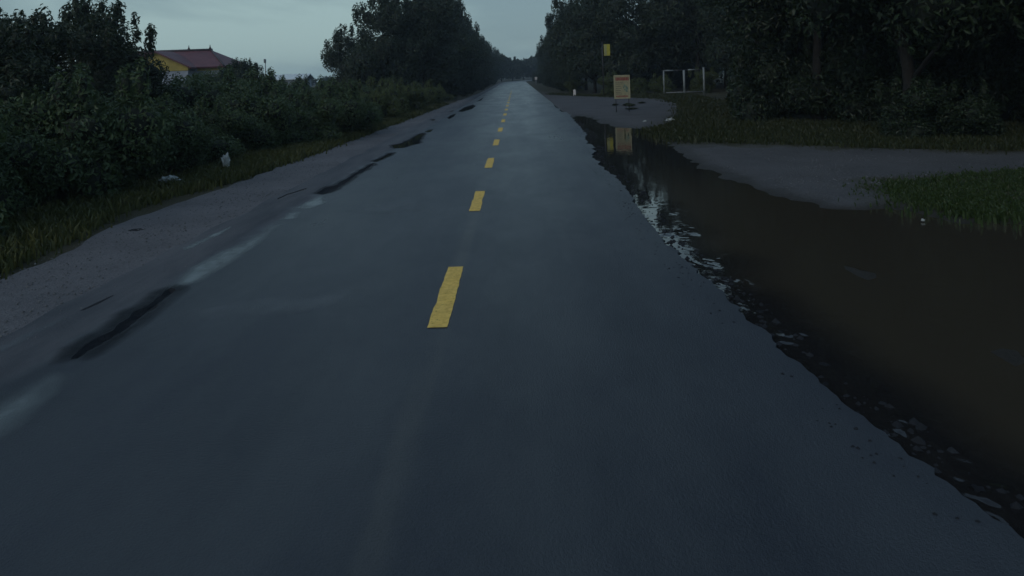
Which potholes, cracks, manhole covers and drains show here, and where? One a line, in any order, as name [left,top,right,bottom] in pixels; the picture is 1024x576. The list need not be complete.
pothole [317,163,374,195]
crack [80,295,114,311]
pothole [70,288,176,360]
pothole [392,133,425,149]
